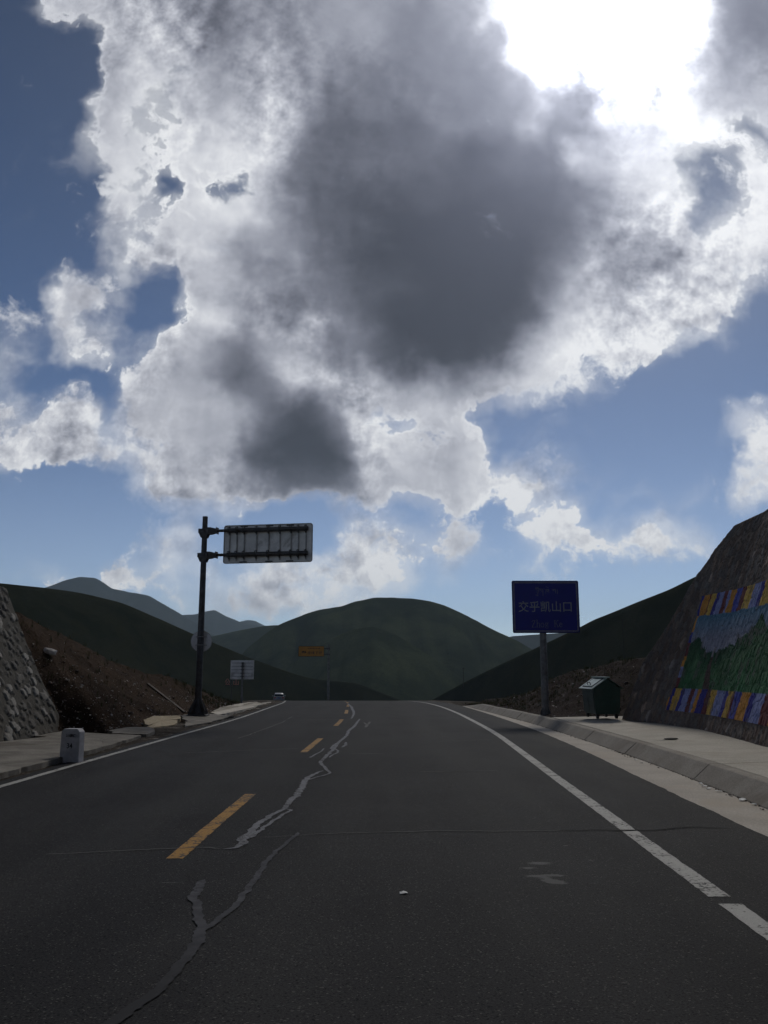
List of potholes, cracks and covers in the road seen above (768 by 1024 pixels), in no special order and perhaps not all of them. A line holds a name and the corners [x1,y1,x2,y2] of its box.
crack [53,830,558,1024]
